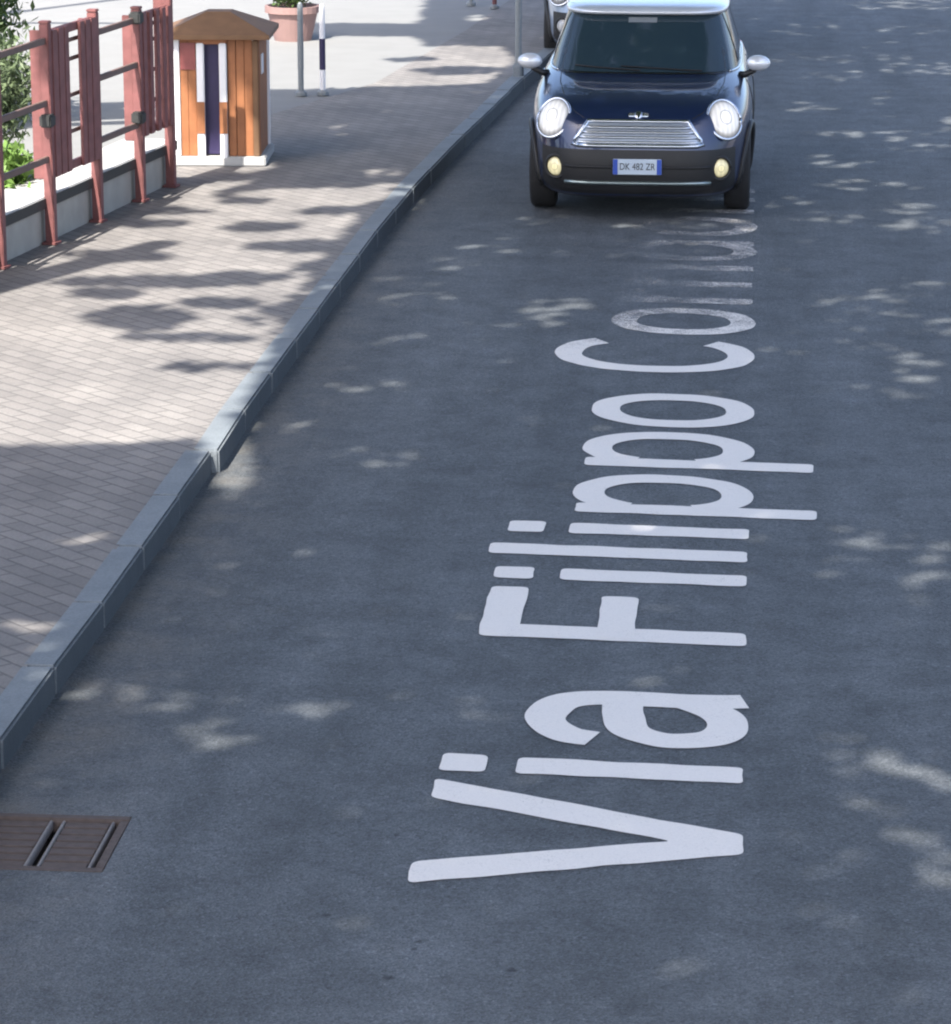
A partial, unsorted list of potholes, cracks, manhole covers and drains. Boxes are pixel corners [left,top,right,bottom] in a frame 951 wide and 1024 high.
drain grate [0,813,131,873]
